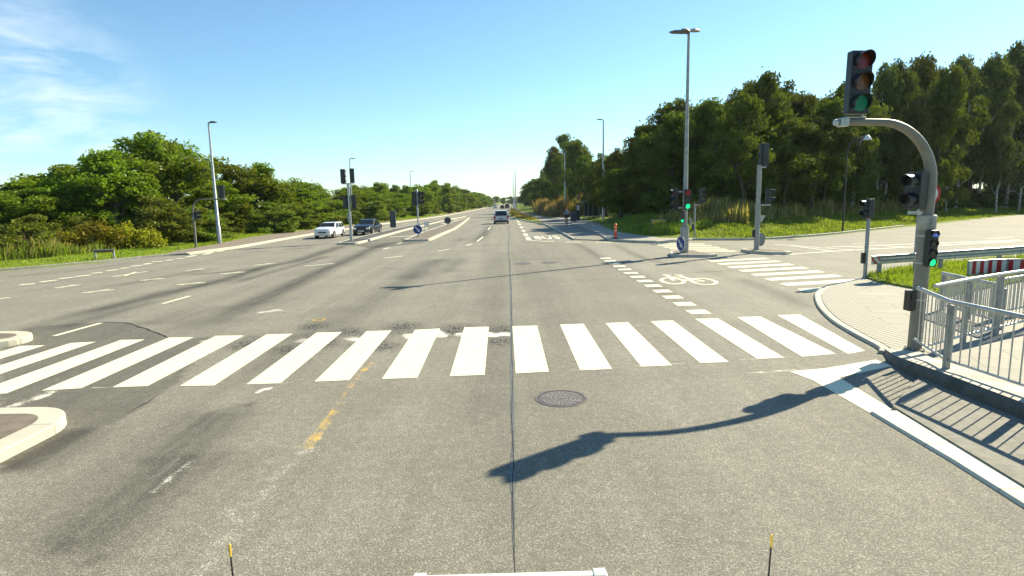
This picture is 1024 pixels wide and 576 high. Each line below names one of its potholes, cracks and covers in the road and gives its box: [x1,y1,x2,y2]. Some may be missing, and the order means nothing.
manhole cover [535,390,587,407]
